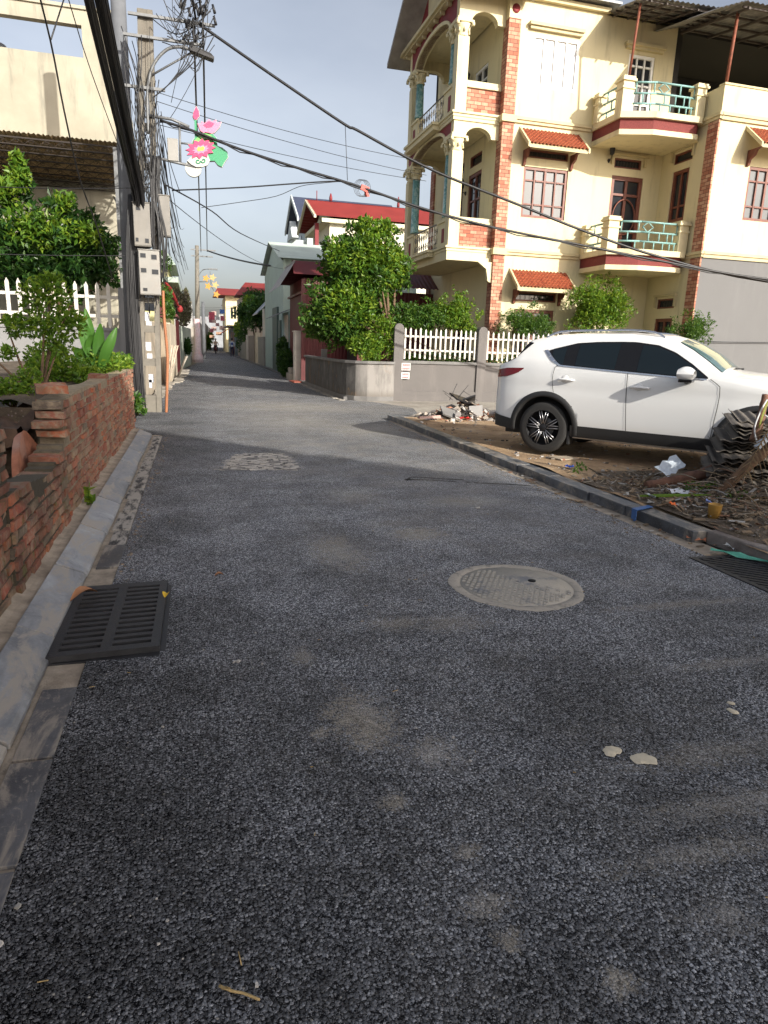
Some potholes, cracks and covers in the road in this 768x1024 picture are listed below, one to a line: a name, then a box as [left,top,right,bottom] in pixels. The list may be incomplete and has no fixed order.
manhole cover [448,565,585,612]
drain grate [45,580,172,666]
drain grate [689,555,768,593]
